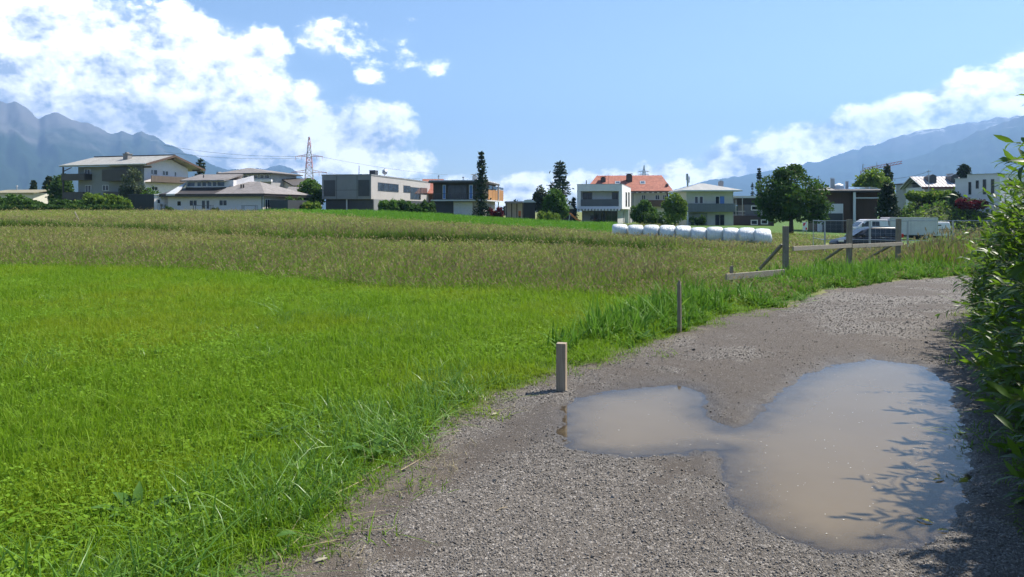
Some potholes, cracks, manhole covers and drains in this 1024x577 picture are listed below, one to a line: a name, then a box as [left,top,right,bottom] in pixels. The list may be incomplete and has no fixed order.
pothole [719,354,995,561]
pothole [545,380,739,505]
